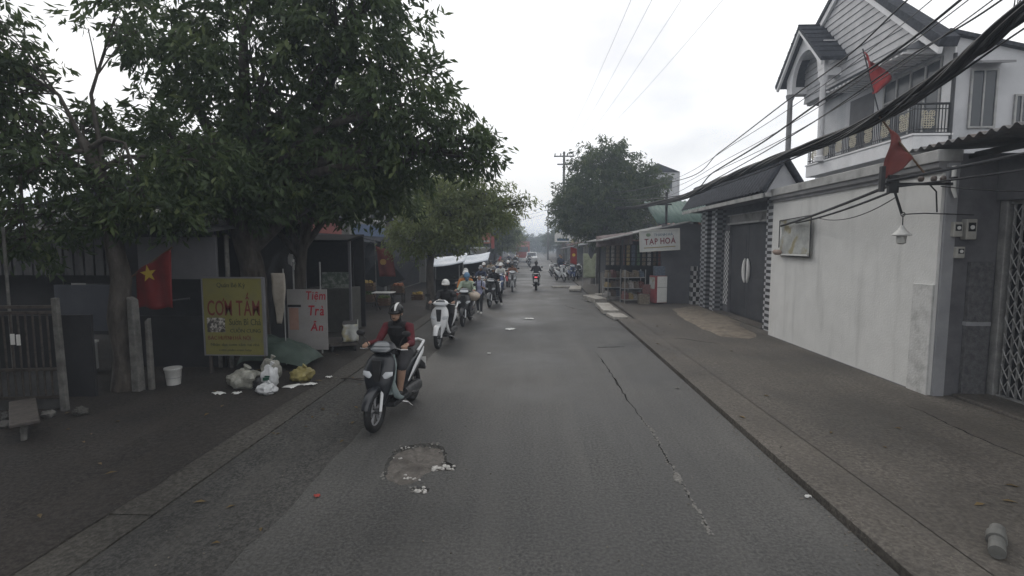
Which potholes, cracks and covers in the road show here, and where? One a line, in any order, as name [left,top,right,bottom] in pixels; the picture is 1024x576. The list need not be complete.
pothole [380,442,456,485]
pothole [409,486,430,494]
